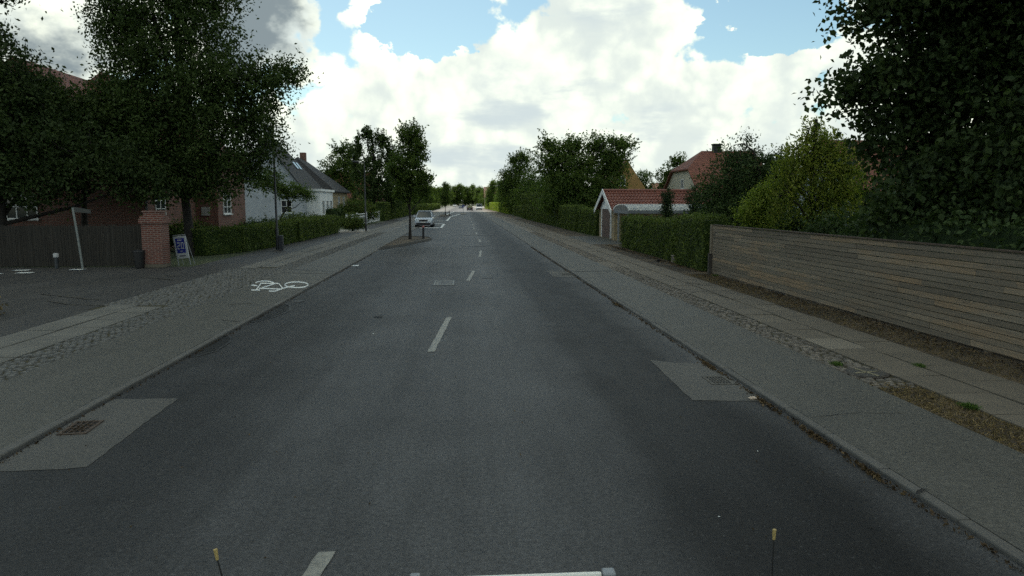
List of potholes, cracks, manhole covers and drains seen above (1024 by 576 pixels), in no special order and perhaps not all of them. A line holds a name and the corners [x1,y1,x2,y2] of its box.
drain grate [56,420,104,435]
drain grate [701,376,735,385]
